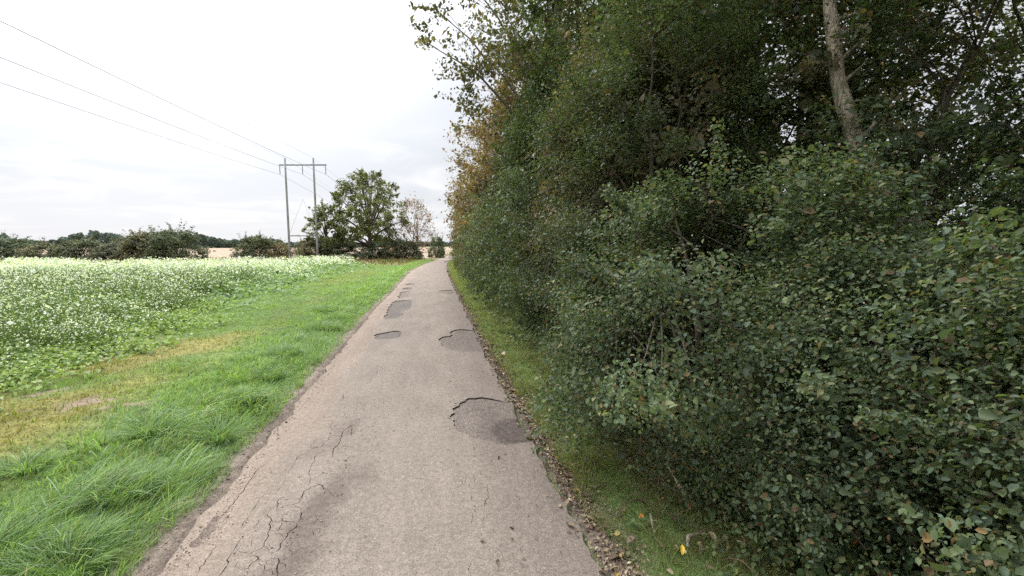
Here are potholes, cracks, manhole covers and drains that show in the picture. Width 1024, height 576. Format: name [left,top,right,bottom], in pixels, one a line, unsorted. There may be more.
pothole [373,331,401,339]
pothole [384,300,412,319]
pothole [439,329,484,352]
pothole [450,397,532,444]
crack [187,395,354,576]
